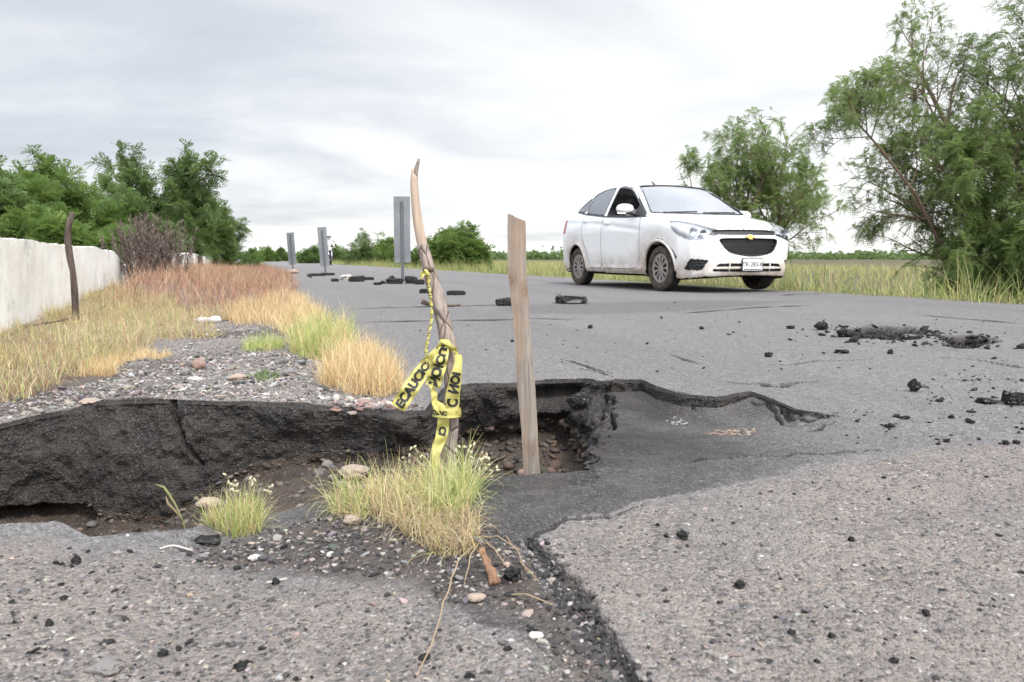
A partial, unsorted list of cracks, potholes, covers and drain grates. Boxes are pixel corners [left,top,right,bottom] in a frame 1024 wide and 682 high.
pothole [939,334,1001,348]
crack [525,504,645,682]
pothole [0,378,614,537]
pothole [848,325,930,340]
